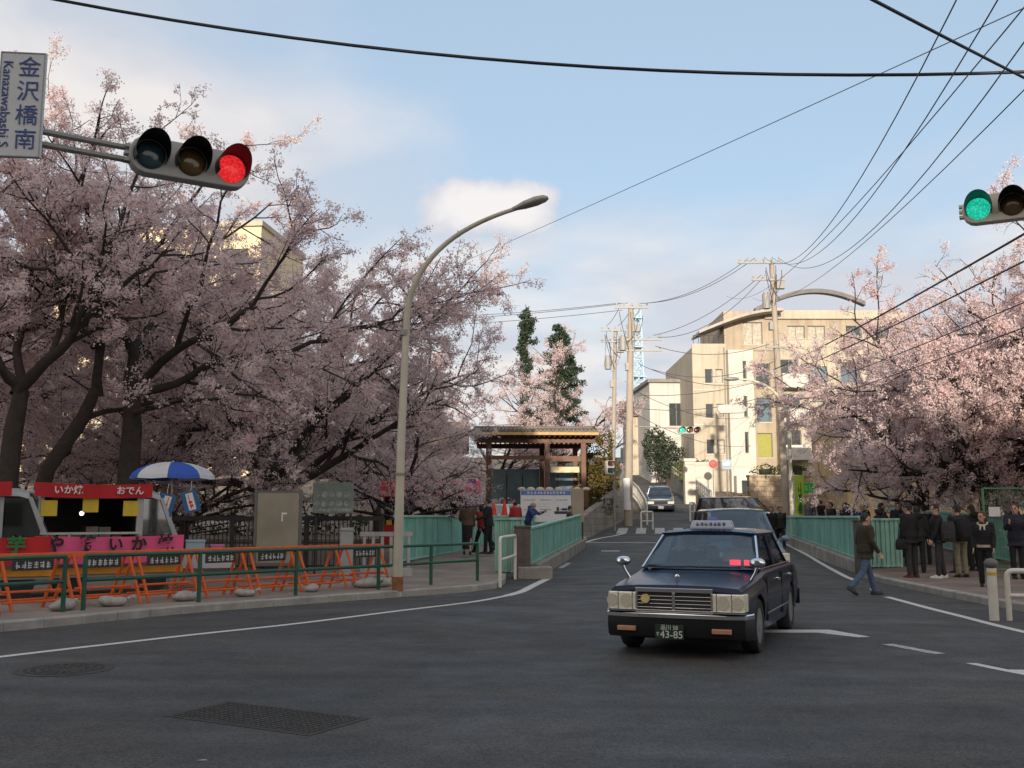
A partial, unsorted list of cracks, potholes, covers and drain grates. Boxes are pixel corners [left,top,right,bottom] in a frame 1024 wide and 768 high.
manhole cover [13,662,115,677]
